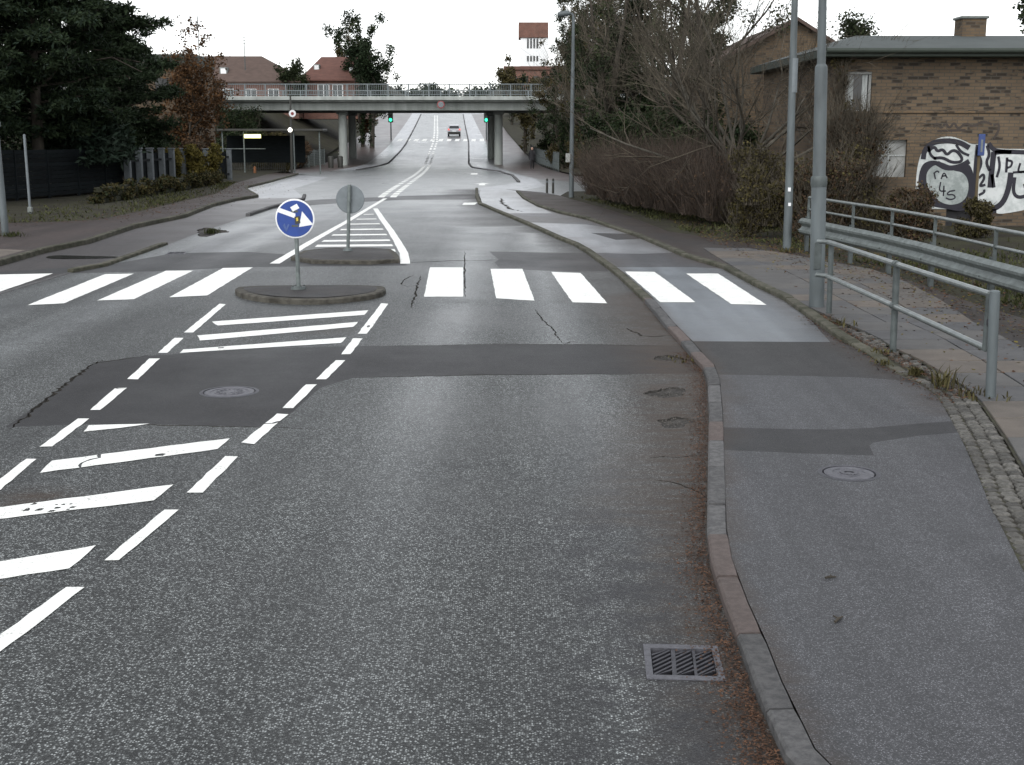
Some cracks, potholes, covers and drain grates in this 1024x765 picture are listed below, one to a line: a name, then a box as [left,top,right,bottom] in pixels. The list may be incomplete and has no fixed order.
manhole cover [199,386,259,398]
crack [401,276,421,308]
pothole [657,417,695,428]
crack [408,311,660,346]
manhole cover [817,465,881,482]
drain grate [643,644,726,682]
pothole [643,387,685,398]
